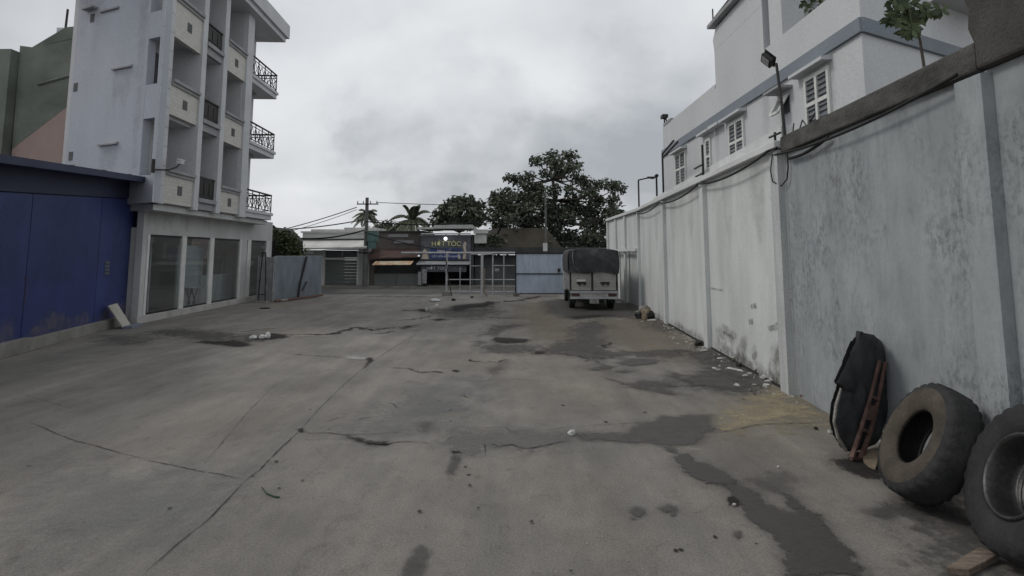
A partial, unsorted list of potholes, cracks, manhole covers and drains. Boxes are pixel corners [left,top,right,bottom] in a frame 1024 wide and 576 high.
crack [306,417,640,455]
crack [30,422,144,459]
crack [241,292,442,373]
crack [146,460,242,571]
